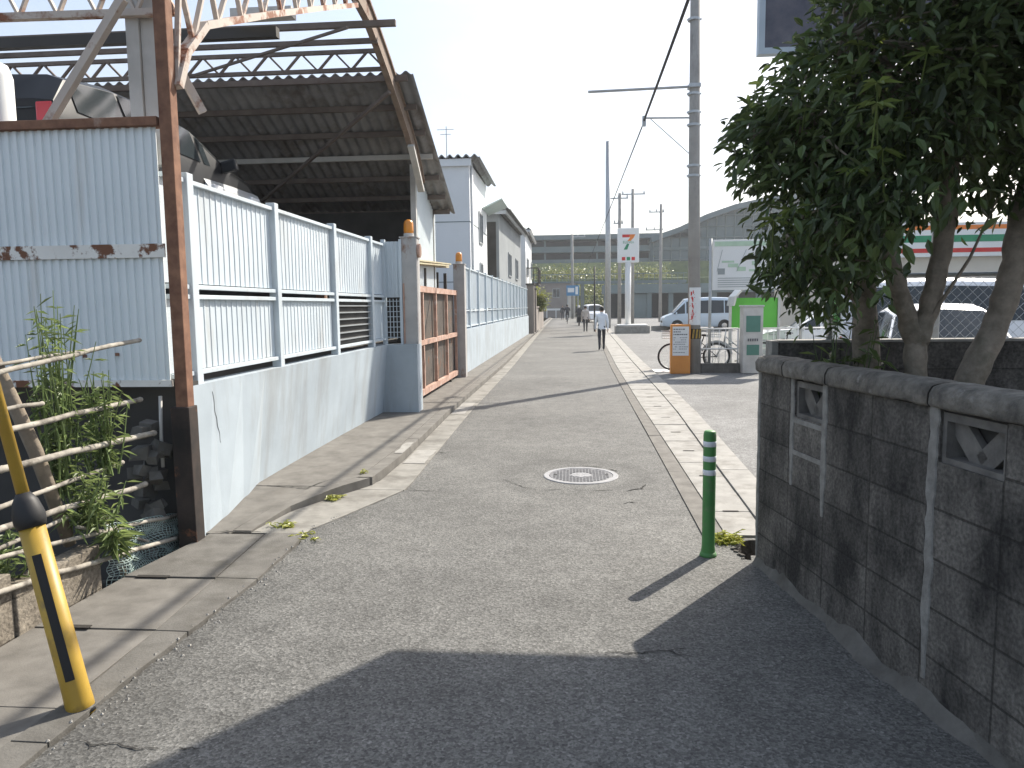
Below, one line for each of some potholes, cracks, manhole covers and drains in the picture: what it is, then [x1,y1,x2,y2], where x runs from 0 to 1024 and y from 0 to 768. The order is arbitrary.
crack [597,648,693,657]
crack [81,739,200,750]
manhole cover [544,467,618,485]
